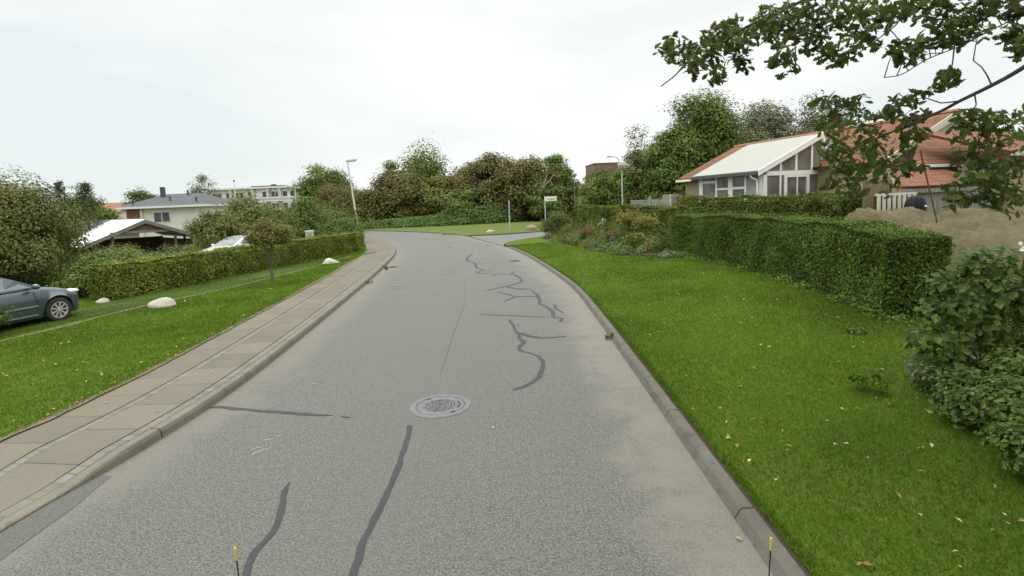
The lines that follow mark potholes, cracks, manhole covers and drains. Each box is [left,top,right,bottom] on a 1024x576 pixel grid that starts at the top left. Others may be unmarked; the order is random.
manhole cover [409,394,471,418]
